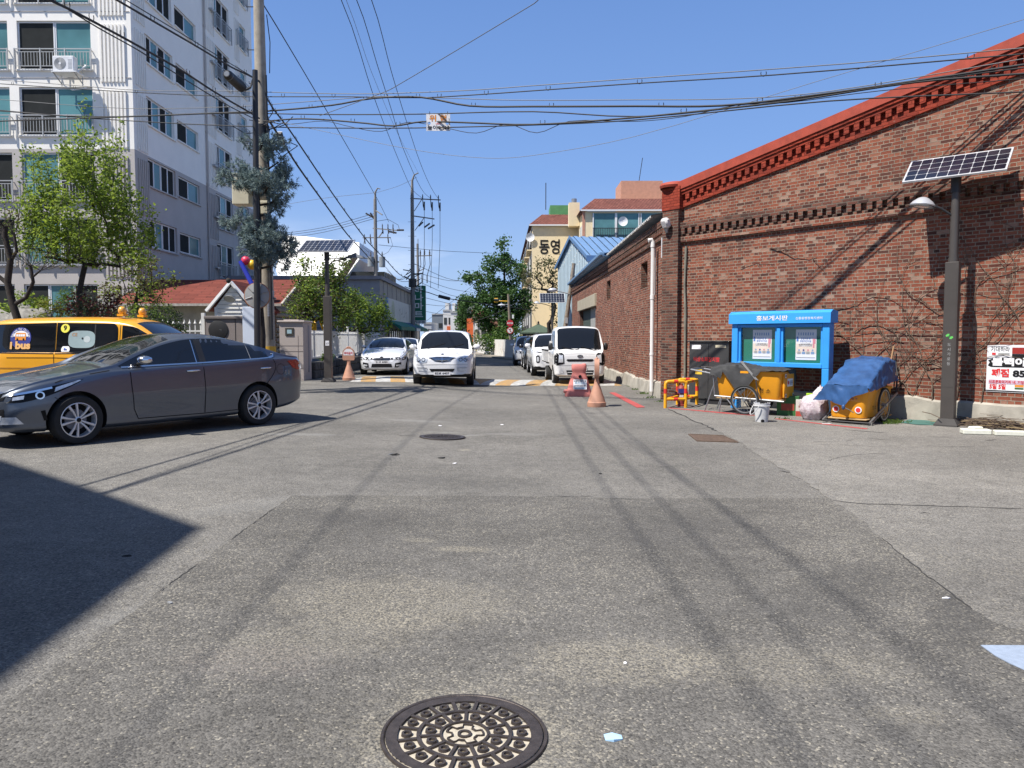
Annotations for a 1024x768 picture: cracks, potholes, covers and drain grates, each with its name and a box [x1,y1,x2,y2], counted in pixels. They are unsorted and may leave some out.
manhole cover [380,694,548,768]
